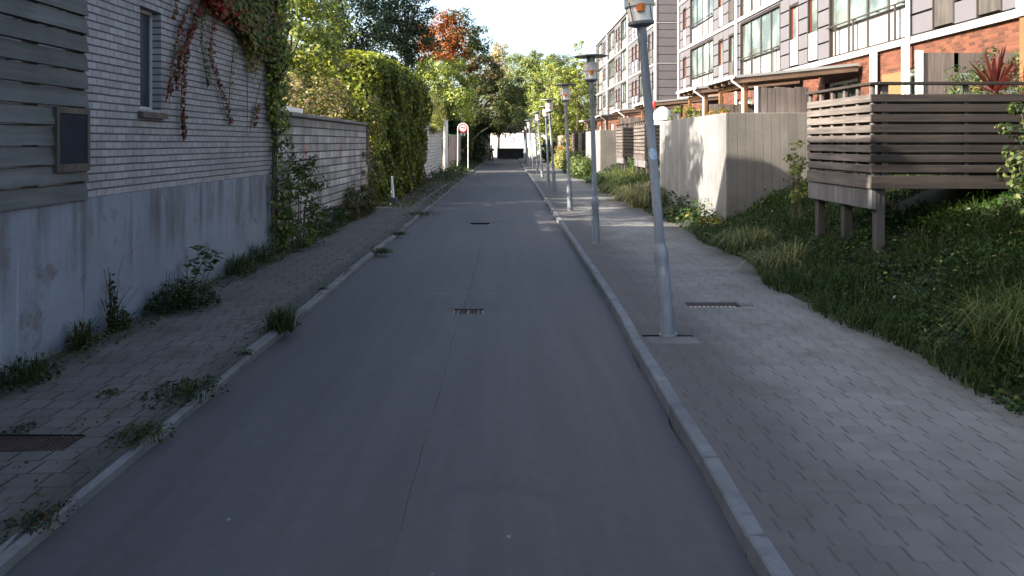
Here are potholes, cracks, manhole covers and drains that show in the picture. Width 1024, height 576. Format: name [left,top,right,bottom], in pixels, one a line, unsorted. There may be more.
drain grate [0,434,86,452]
crack [387,227,487,575]
